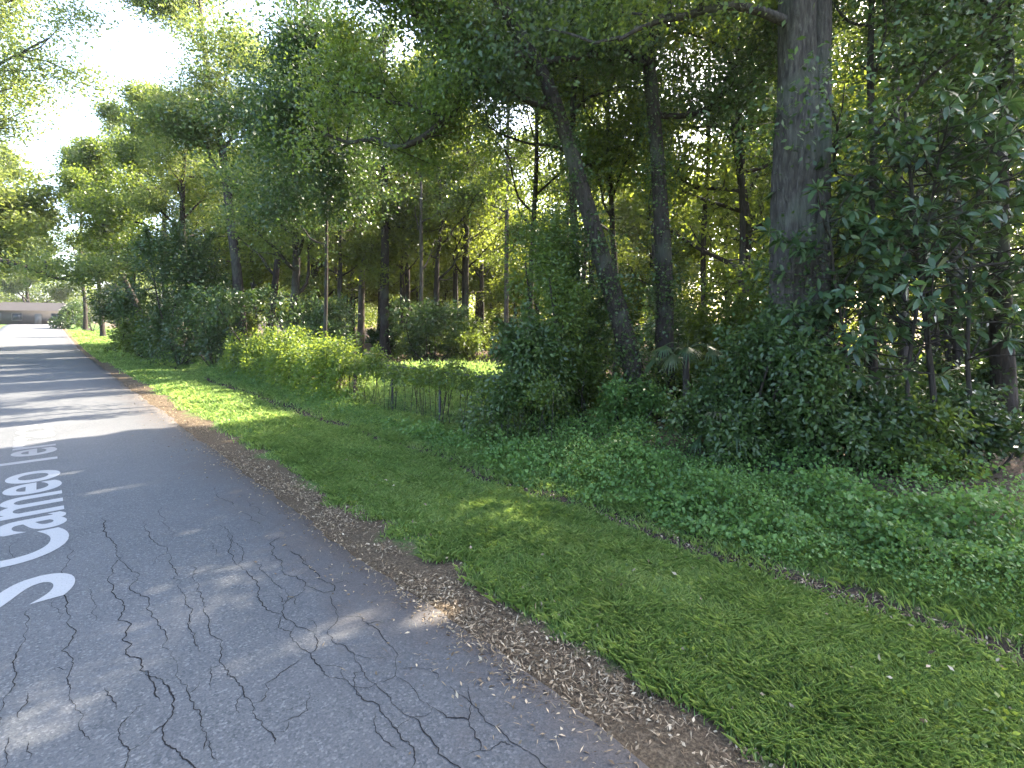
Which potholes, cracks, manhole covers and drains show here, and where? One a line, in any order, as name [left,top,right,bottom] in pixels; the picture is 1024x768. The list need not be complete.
crack [0,612,32,767]
crack [51,511,547,768]
